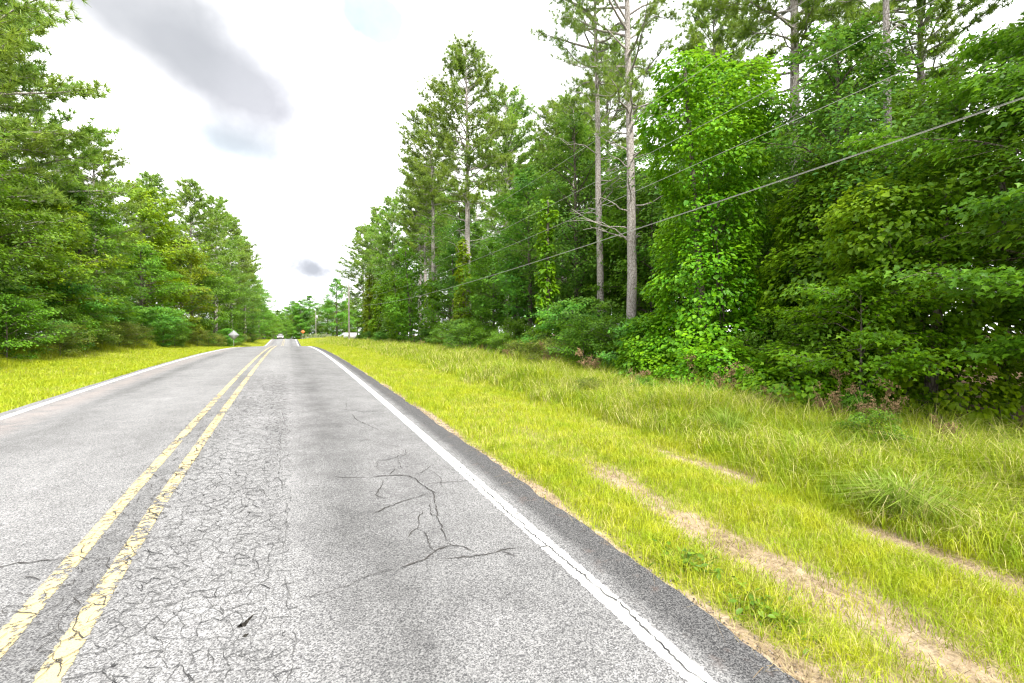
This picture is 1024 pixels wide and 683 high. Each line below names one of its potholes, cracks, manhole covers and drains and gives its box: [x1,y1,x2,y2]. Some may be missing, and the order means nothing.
crack [0,375,300,683]
crack [305,417,707,683]
